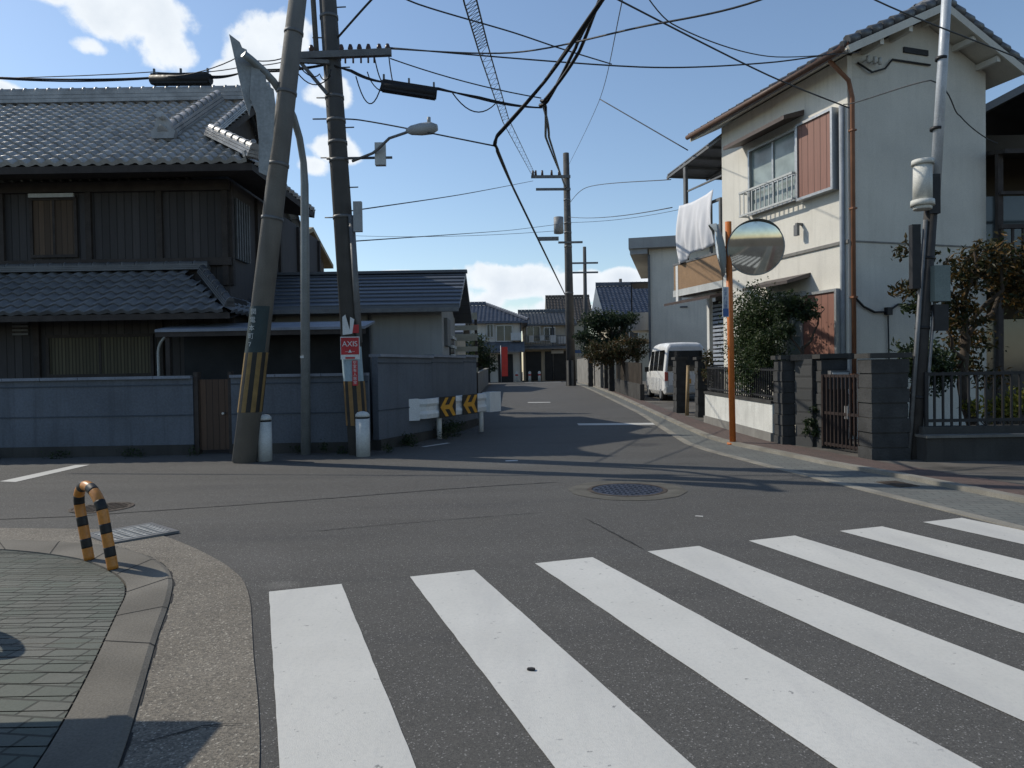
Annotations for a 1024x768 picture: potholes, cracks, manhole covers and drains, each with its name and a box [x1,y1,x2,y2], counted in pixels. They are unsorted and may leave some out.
drain grate [90,522,179,544]
manhole cover [569,481,687,500]
manhole cover [68,502,134,513]
crack [587,519,643,549]
